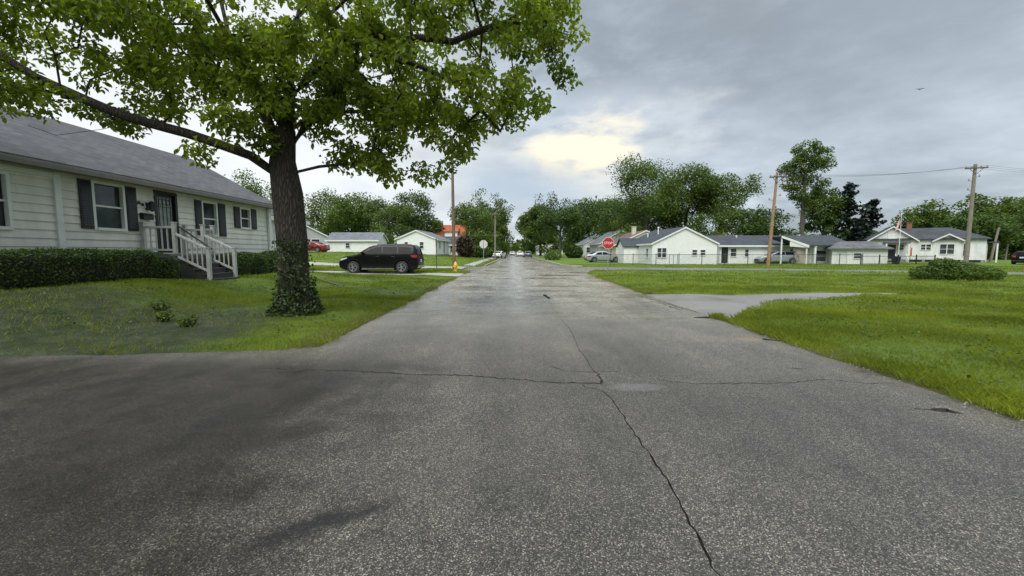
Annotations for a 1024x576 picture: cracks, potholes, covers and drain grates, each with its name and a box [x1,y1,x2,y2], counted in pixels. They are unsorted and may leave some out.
crack [254,300,721,576]
crack [656,368,876,384]
